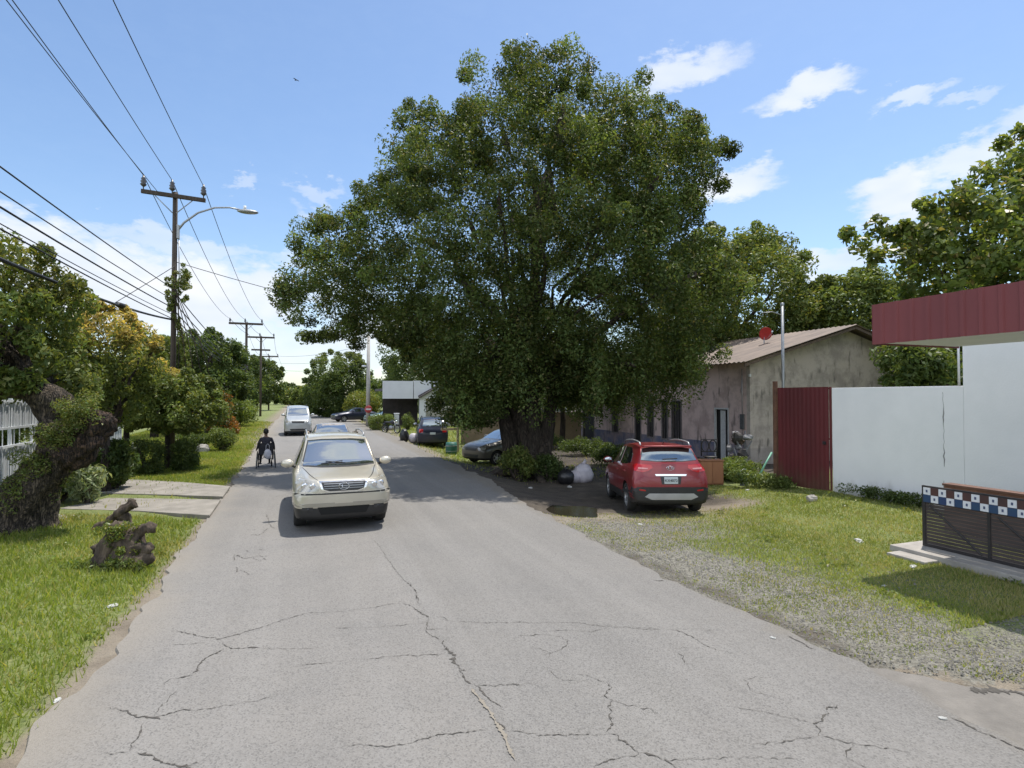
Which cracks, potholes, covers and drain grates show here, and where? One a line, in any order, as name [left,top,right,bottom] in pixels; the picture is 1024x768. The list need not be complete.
crack [577,673,905,768]
crack [304,543,728,759]
crack [109,696,274,768]
crack [158,603,392,709]
